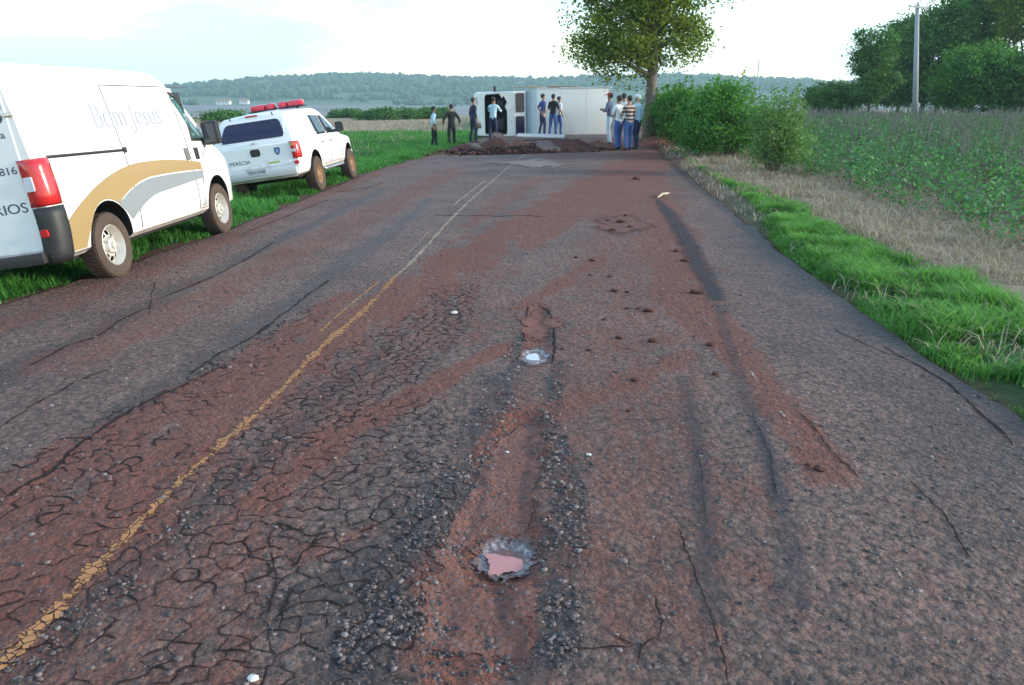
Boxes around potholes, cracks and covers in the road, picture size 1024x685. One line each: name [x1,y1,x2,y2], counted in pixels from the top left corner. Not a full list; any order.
pothole [518,345,553,367]
pothole [593,214,658,236]
crack [800,413,857,476]
crack [910,479,970,556]
pothole [517,310,564,341]
crack [833,328,1013,445]
crack [0,280,480,685]
crack [564,450,729,684]
crack [522,305,556,364]
